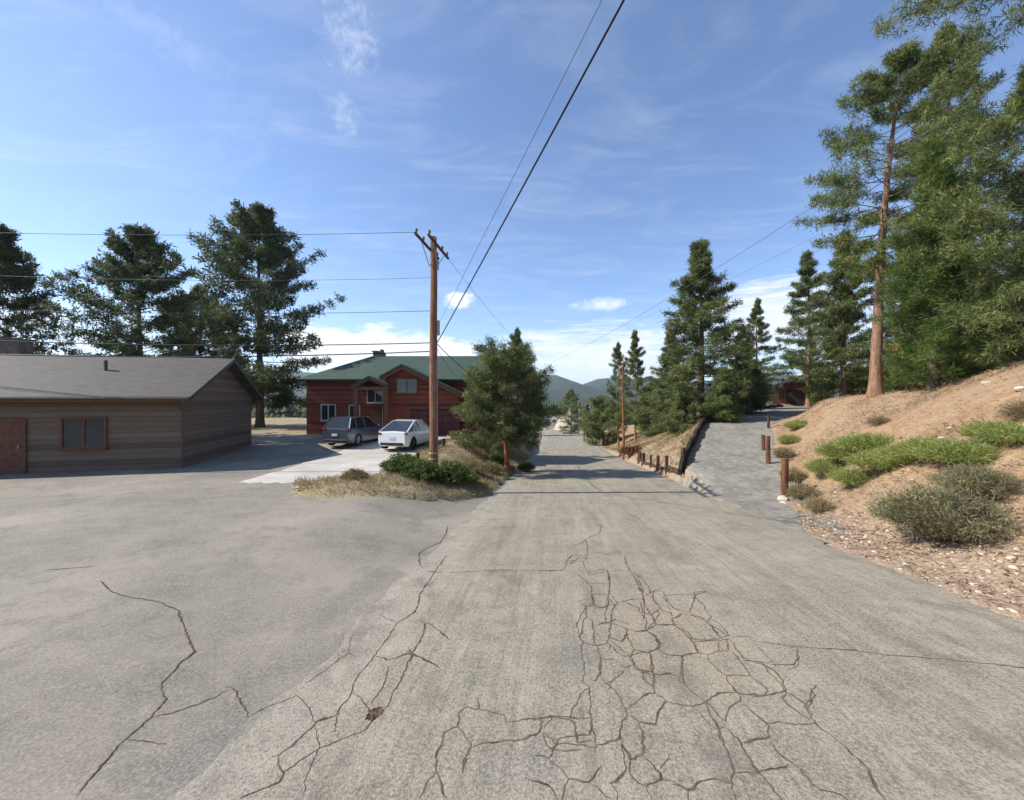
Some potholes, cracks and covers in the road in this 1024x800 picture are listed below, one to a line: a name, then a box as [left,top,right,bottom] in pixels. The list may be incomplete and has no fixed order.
crack [736,636,1024,668]
crack [47,526,562,799]
crack [419,525,886,800]
